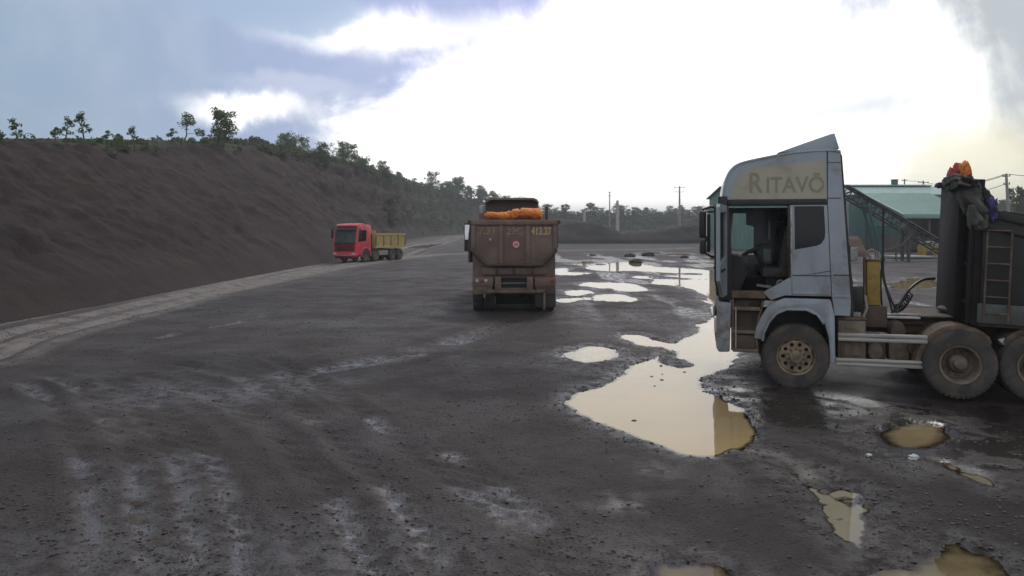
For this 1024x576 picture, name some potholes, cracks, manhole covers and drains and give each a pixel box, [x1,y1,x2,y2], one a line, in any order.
pothole [550,303,774,456]
